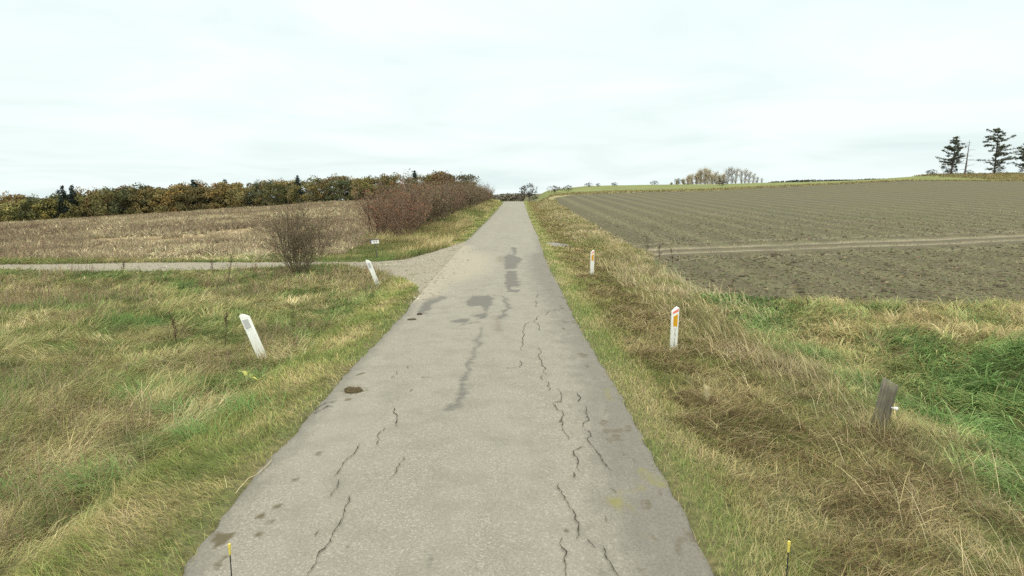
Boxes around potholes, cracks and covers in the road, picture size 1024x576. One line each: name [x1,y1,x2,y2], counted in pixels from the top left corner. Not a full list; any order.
crack [307,446,358,575]
crack [502,316,618,575]
